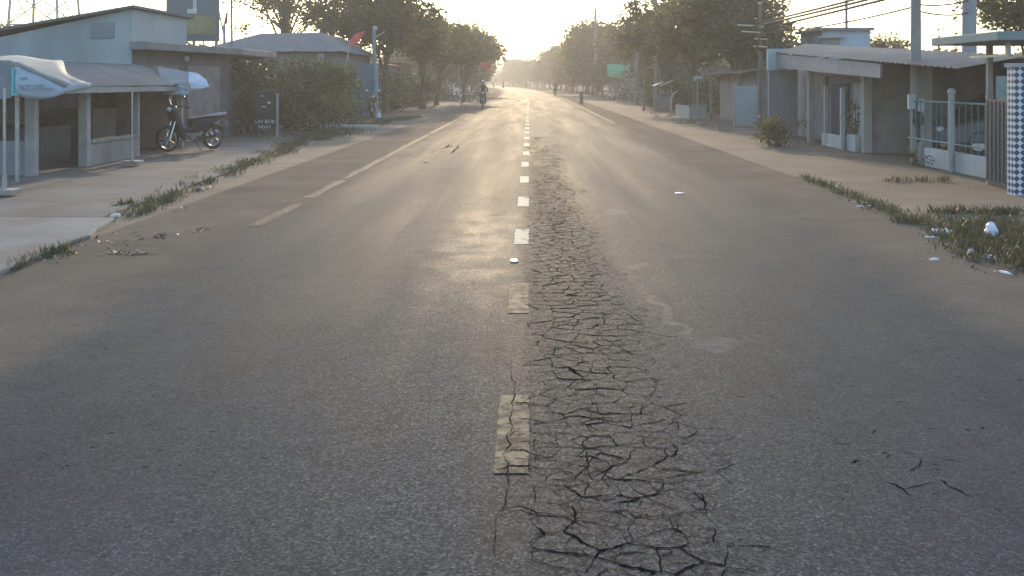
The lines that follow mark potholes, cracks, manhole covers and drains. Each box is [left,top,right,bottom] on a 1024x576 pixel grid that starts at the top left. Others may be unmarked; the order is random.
crack [492,139,771,576]
